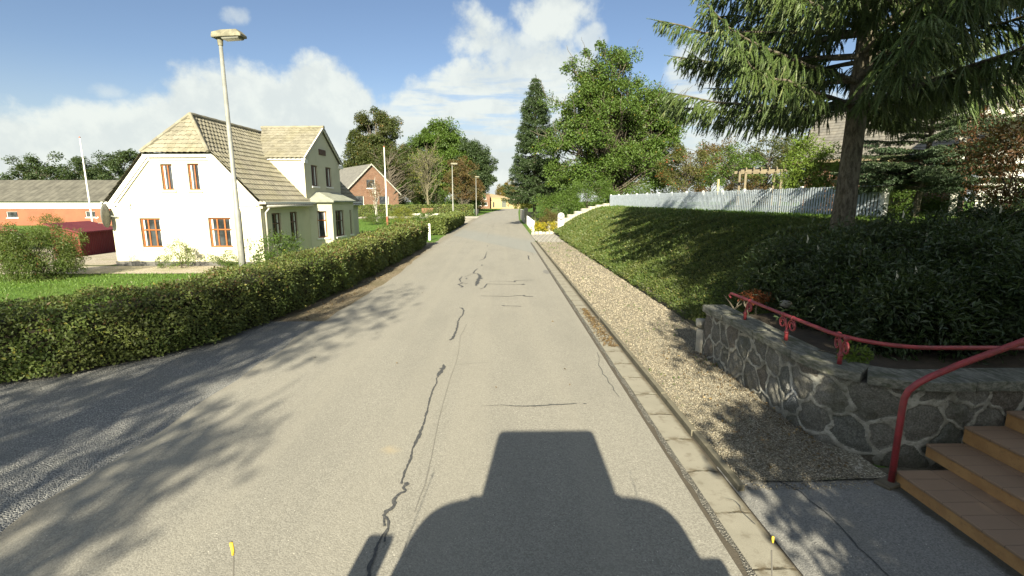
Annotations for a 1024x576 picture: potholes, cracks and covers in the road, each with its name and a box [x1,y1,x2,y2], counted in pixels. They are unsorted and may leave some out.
crack [458,225,533,306]
